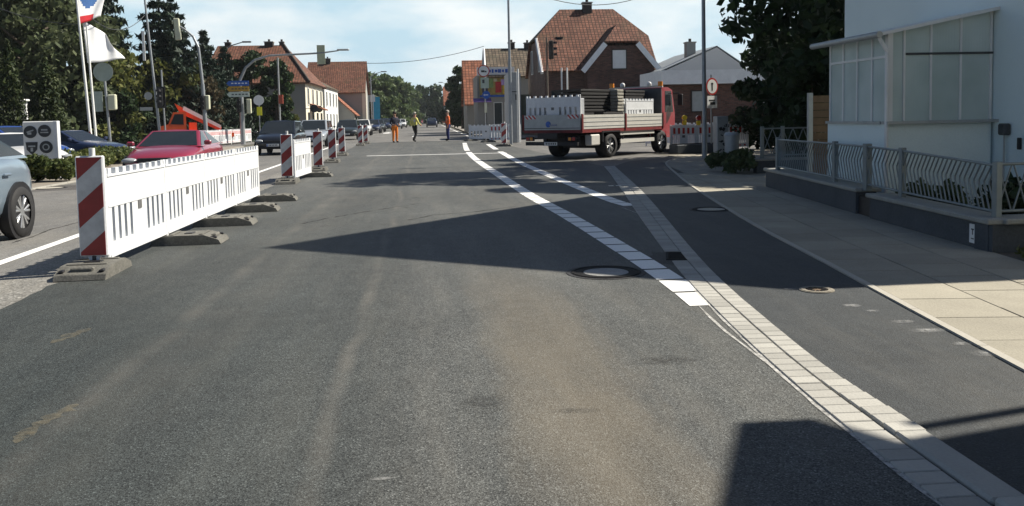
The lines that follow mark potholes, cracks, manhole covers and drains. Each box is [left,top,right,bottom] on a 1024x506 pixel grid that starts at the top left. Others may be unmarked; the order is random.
manhole cover [566,265,646,280]
manhole cover [799,286,835,294]
drain grate [666,252,687,260]
